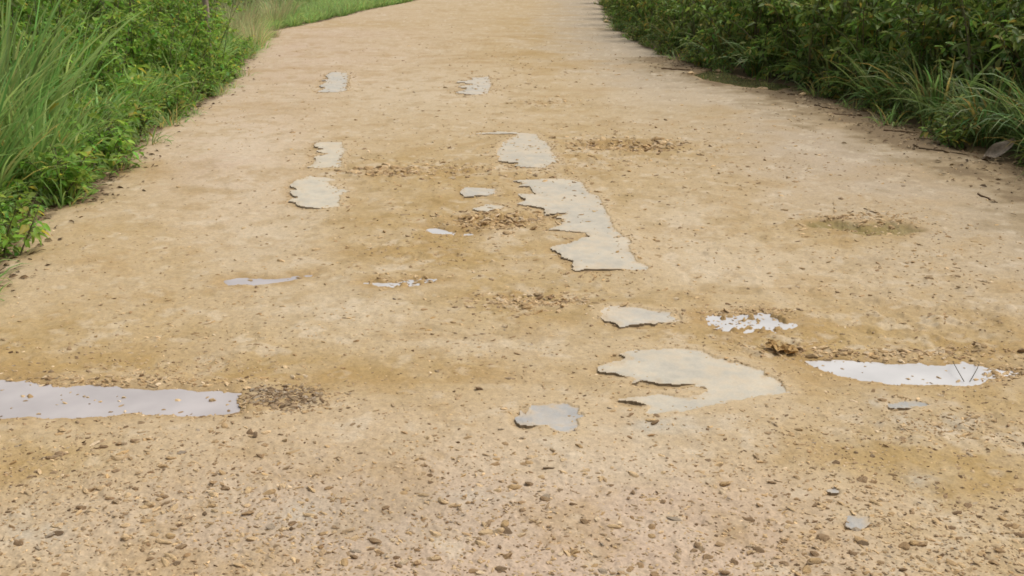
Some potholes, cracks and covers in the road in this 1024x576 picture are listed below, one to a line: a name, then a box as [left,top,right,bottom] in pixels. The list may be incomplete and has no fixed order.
pothole [444,212,540,229]
pothole [212,269,323,287]
pothole [0,372,252,422]
pothole [670,308,804,336]
pothole [801,217,929,237]
pothole [789,353,1024,388]
